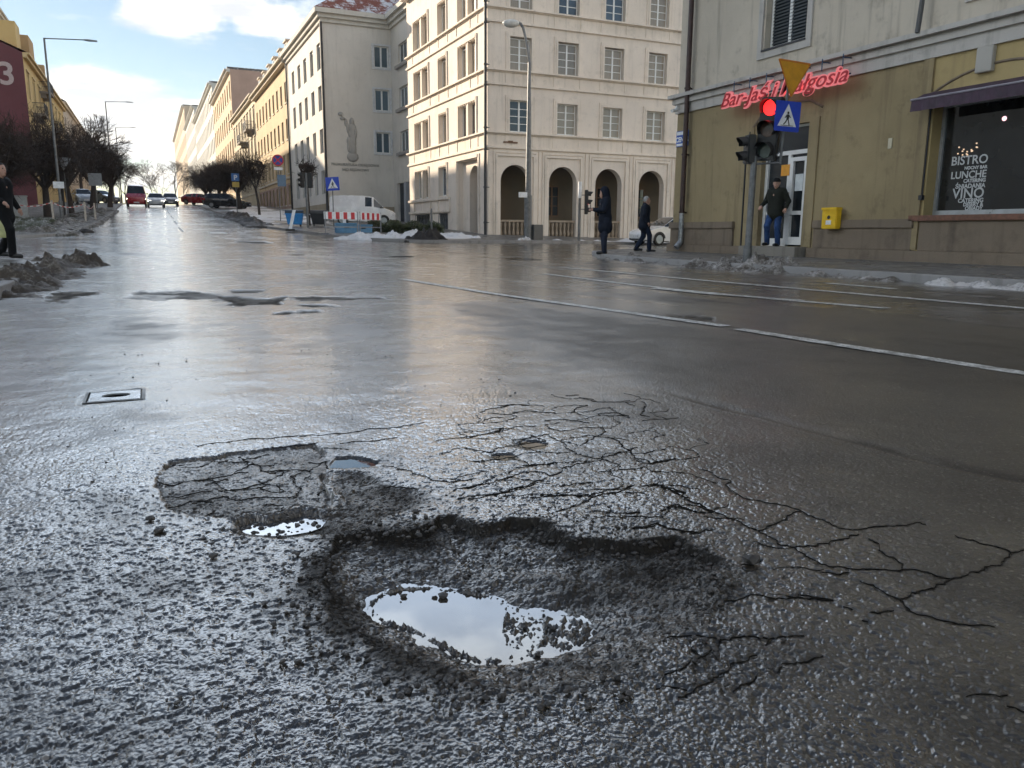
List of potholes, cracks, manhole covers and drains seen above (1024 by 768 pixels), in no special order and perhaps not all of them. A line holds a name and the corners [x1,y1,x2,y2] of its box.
crack [157,393,1024,698]
pothole [228,469,431,539]
pothole [156,444,334,518]
utility cover [82,388,146,404]
pothole [316,514,743,695]
